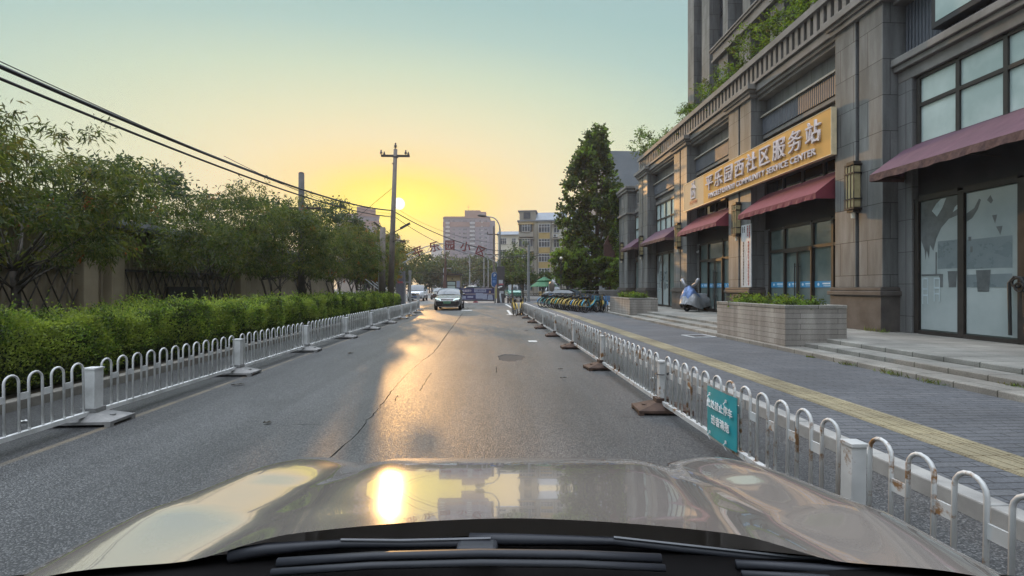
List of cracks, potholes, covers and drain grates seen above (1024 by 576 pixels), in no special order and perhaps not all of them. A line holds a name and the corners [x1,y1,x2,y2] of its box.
crack [330,306,468,458]
